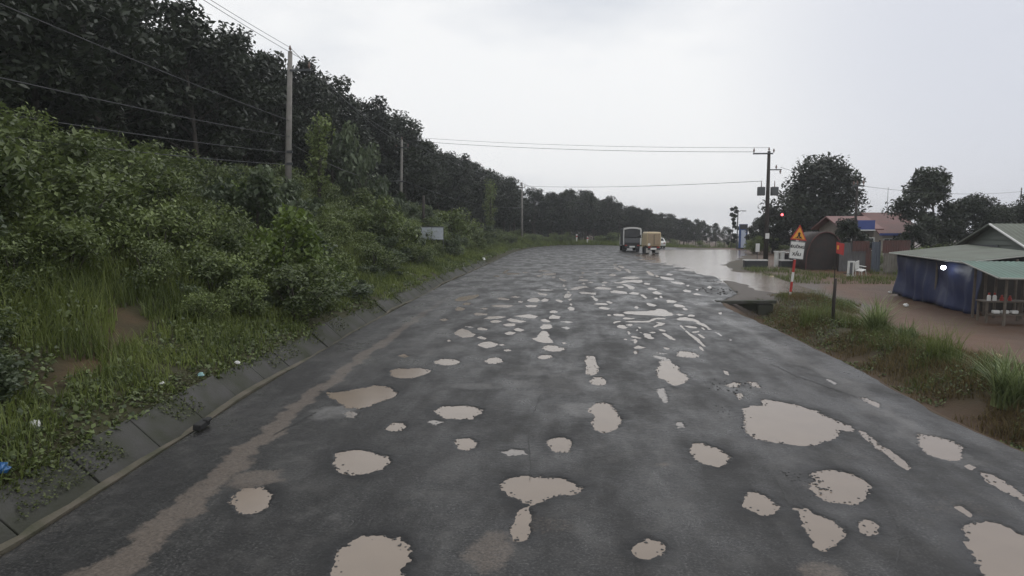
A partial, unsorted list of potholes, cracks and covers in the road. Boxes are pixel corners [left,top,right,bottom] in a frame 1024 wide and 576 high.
pothole [792,508,846,552]
pothole [330,535,413,576]
pothole [783,470,872,505]
pothole [655,359,690,386]
pothole [509,507,533,542]
pothole [722,399,860,446]
pothole [227,486,273,515]
pothole [326,385,397,409]
pothole [588,402,622,433]
pothole [915,434,965,461]
pothole [631,536,668,560]
pothole [742,491,780,516]
